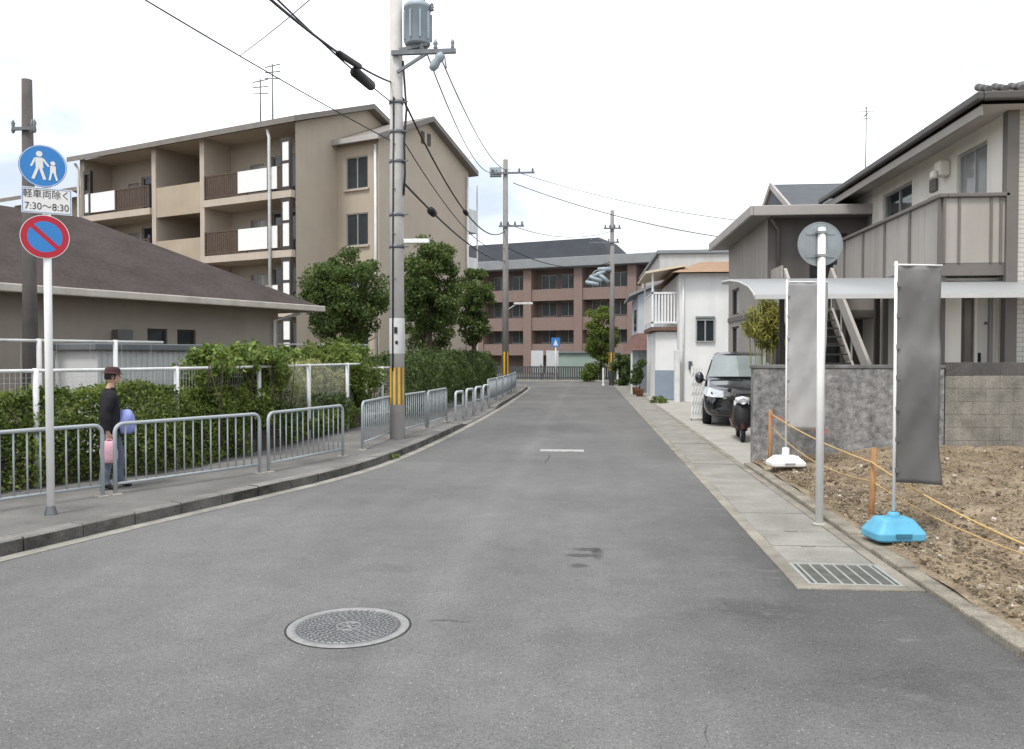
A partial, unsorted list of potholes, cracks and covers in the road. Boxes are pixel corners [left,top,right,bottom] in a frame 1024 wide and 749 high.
drain grate [788,562,904,586]
manhole cover [284,607,411,649]
